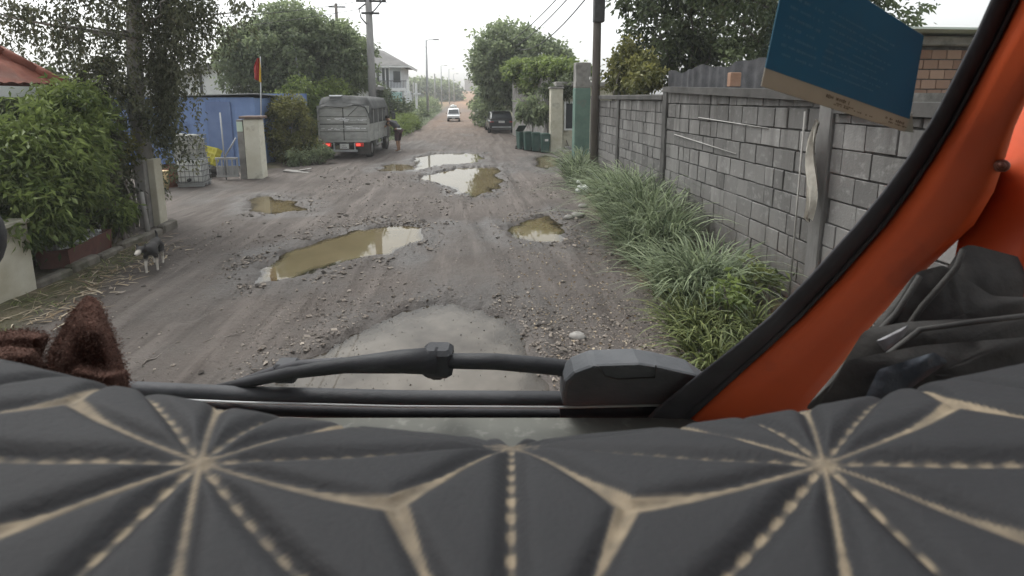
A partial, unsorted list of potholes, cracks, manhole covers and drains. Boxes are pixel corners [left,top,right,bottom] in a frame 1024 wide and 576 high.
pothole [404,163,521,198]
pothole [237,192,318,215]
pothole [370,162,422,172]
pothole [530,154,565,170]
pothole [405,152,491,172]
pothole [197,215,458,301]
